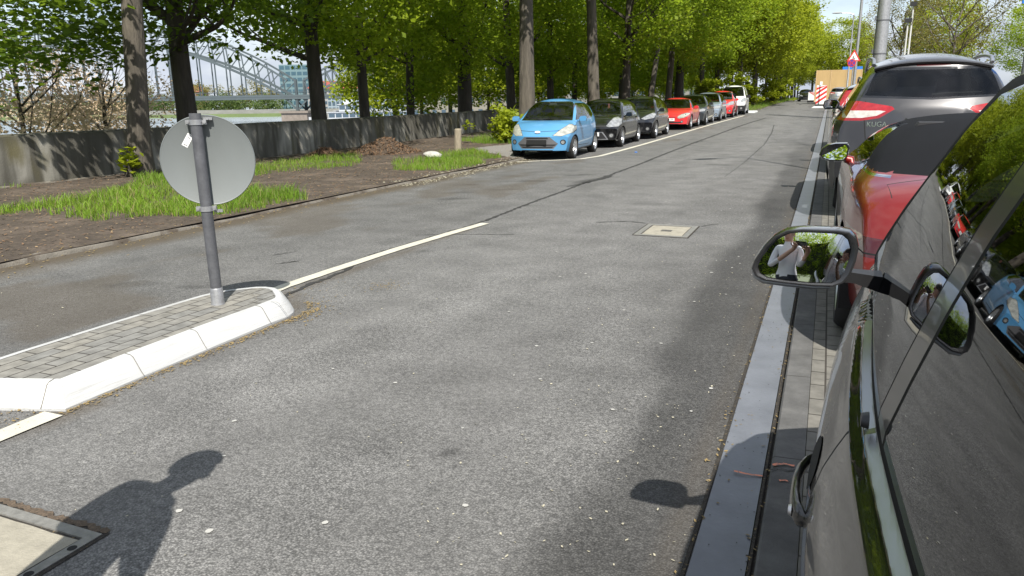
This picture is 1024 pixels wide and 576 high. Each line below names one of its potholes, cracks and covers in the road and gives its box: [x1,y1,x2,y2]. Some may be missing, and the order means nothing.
crack [724,125,775,177]
manhole cover [0,502,110,576]
manhole cover [632,224,700,238]
